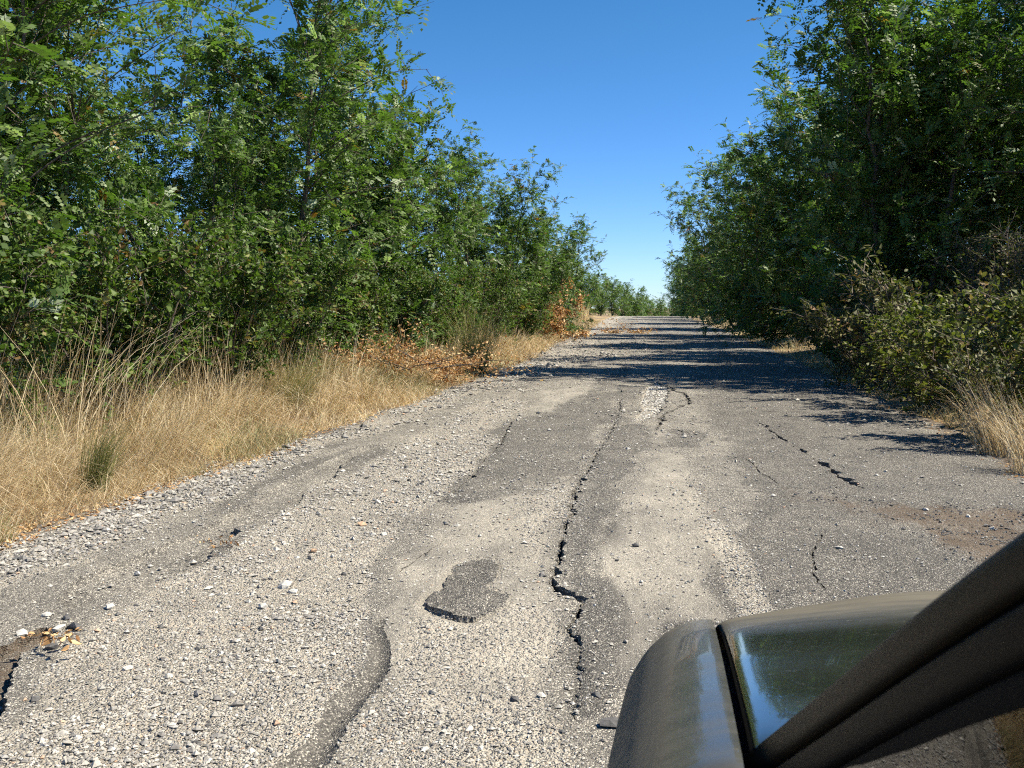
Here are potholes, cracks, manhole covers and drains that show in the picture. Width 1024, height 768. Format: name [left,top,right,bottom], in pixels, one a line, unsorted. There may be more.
crack [655,386,692,433]
crack [732,411,865,492]
crack [549,399,629,722]
crack [810,529,829,598]
